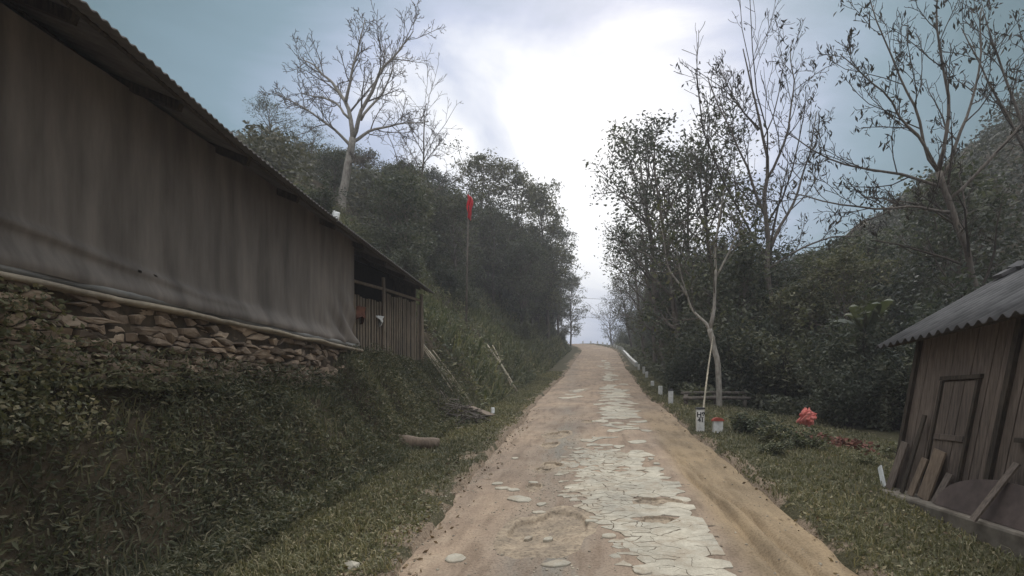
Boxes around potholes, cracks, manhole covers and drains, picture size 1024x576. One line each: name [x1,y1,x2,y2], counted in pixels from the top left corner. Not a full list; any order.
pothole [632,497,689,506]
crack [560,374,722,576]
pothole [493,506,598,559]
pothole [637,516,681,524]
